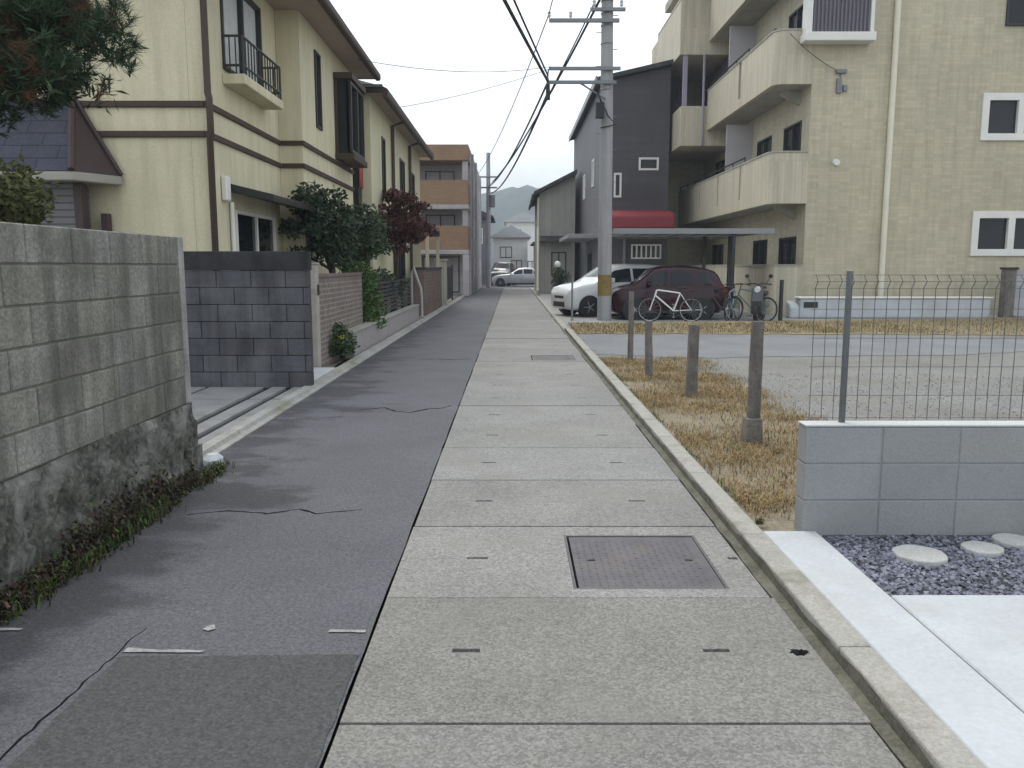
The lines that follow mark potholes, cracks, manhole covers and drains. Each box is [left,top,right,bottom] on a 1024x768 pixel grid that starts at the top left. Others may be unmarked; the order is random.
crack [0,628,147,761]
crack [360,405,450,413]
manhole cover [564,535,729,589]
